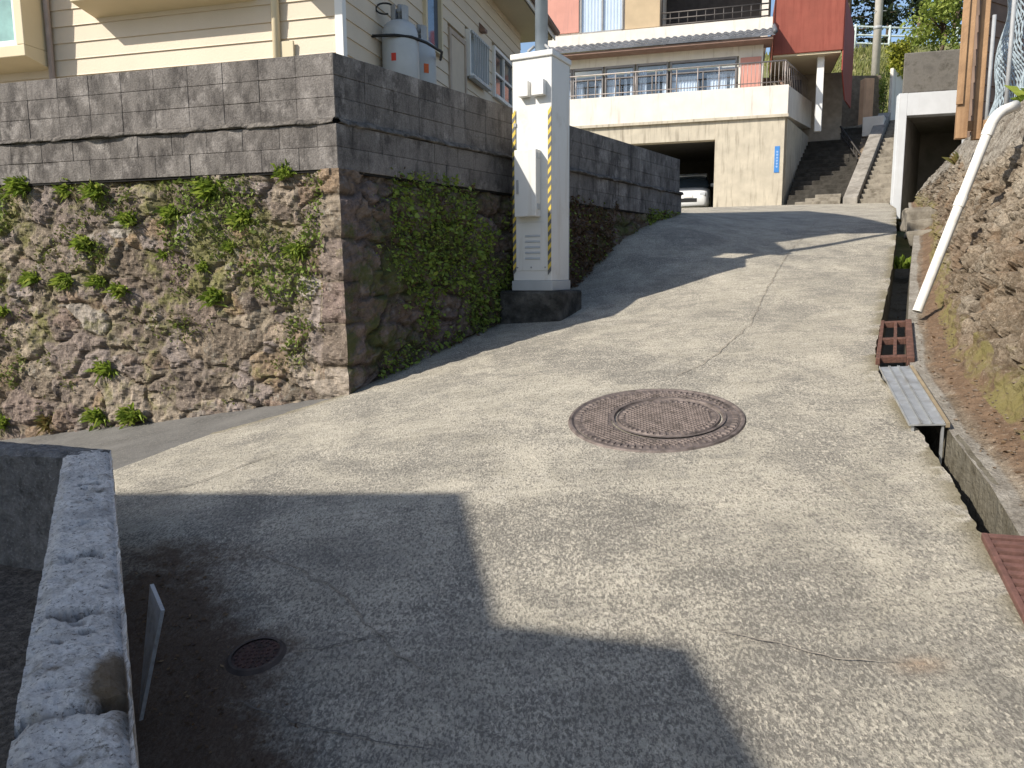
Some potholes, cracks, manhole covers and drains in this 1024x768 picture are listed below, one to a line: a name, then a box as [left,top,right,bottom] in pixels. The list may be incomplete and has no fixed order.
crack [709,629,905,662]
crack [235,699,439,750]
drain grate [981,533,1024,624]
crack [252,551,432,672]
drain grate [875,319,915,368]
manhole cover [568,388,746,453]
crack [674,220,819,377]
manhole cover [225,636,287,676]
